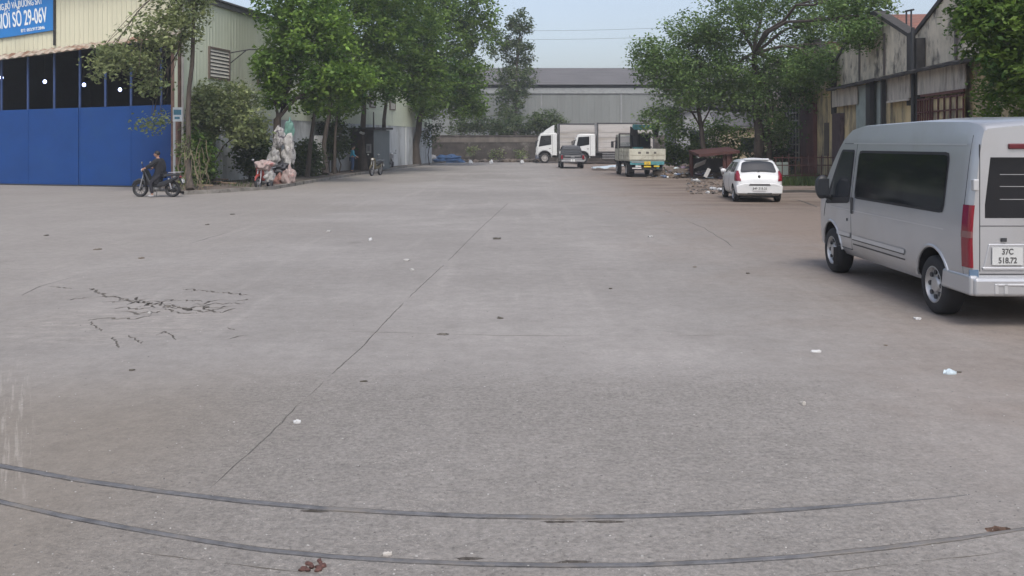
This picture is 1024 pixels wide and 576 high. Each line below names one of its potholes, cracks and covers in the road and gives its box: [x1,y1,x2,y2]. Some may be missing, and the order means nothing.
crack [48,286,248,348]
